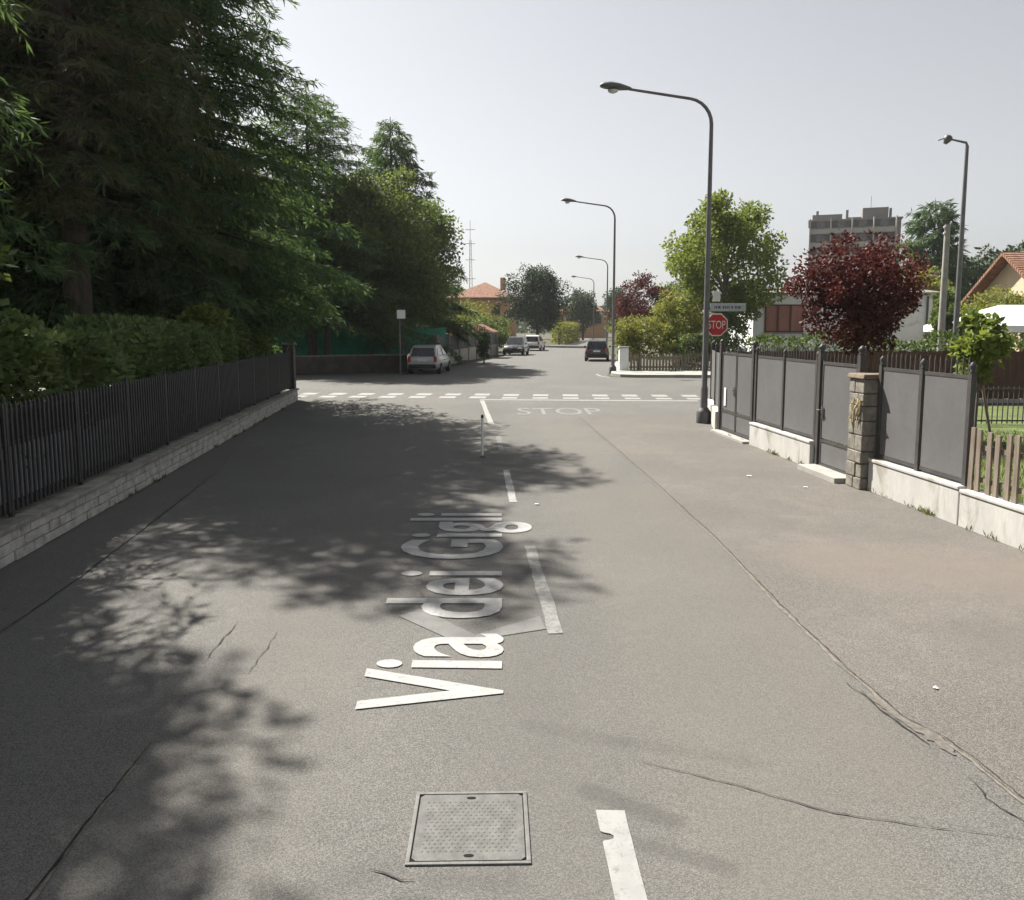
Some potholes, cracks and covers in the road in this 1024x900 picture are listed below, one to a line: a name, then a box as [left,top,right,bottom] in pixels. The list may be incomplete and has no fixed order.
crack [371,869,417,880]
crack [635,682,1024,839]
manhole cover [405,791,531,866]
